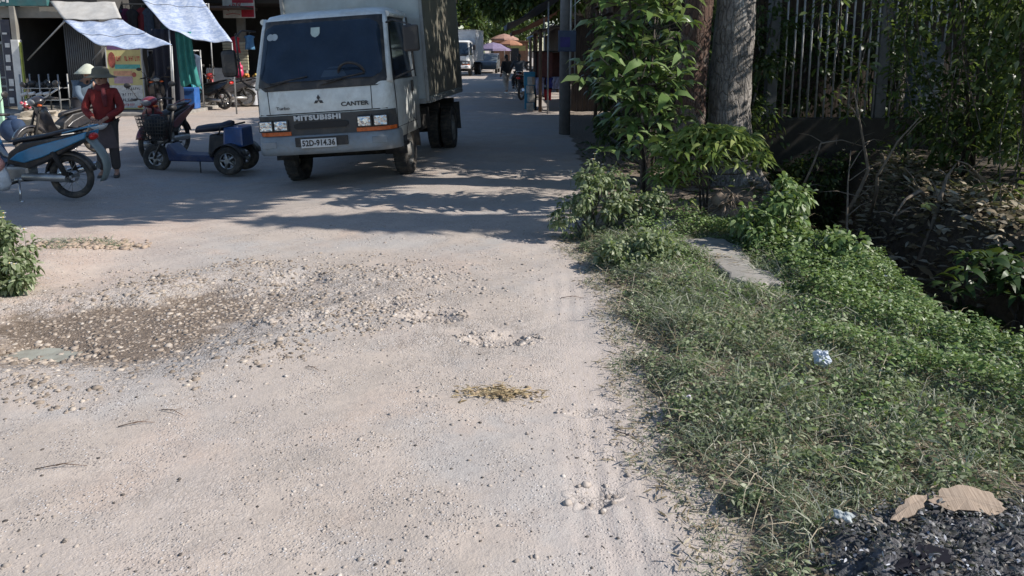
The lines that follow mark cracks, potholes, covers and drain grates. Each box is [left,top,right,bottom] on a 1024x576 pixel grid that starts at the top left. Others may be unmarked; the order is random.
pothole [560,486,628,514]
pothole [395,308,466,325]
pothole [0,266,415,391]
pothole [454,330,537,348]
